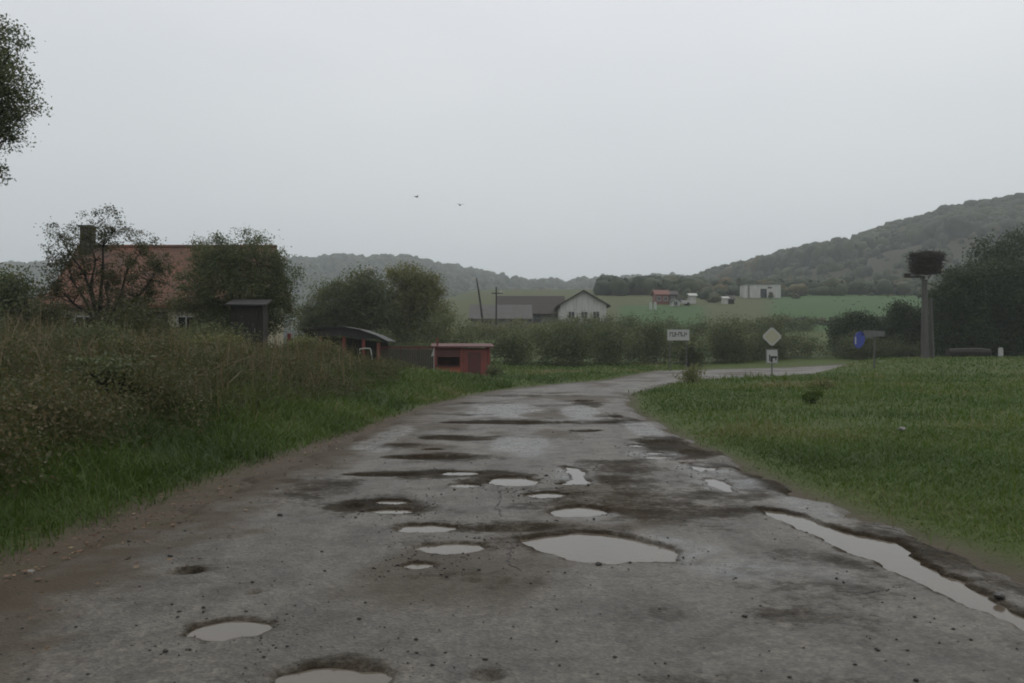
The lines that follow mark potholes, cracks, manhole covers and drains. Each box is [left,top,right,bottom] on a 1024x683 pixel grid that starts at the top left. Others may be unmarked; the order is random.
pothole [393,522,462,533]
pothole [412,540,490,555]
pothole [546,504,611,517]
pothole [754,506,1024,631]
pothole [163,566,205,575]
pothole [269,662,398,683]
pothole [701,477,735,492]
pothole [485,476,542,486]
pothole [180,617,279,642]
pothole [557,466,594,485]
pothole [401,561,435,569]
pothole [513,529,685,564]
